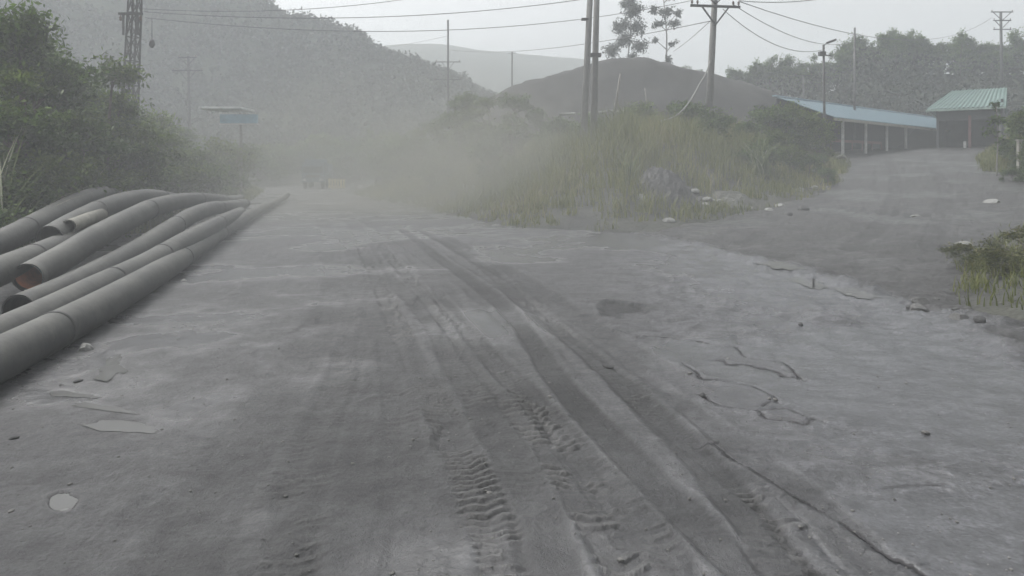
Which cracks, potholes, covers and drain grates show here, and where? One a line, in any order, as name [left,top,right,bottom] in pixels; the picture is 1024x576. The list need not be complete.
crack [699,442,928,576]
pothole [48,492,79,512]
crack [608,328,824,425]
pothole [597,299,649,317]
